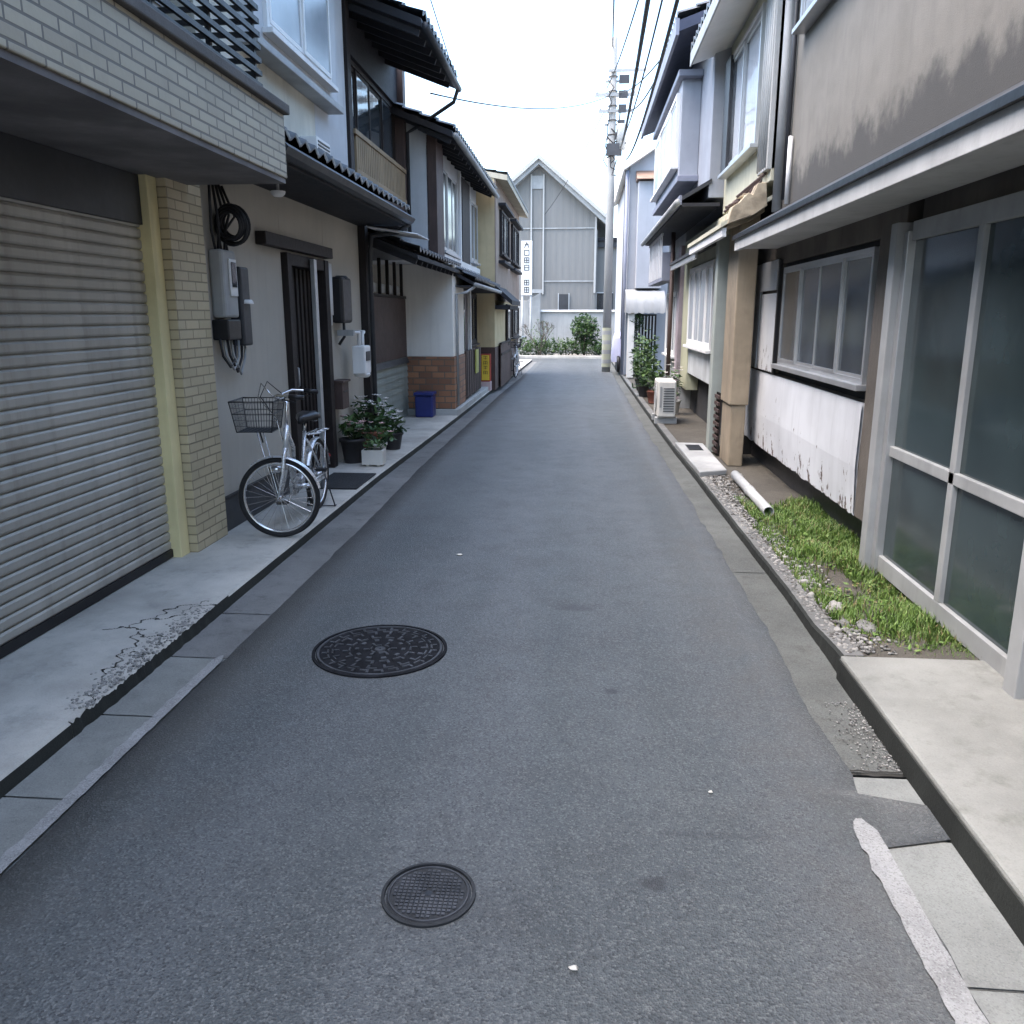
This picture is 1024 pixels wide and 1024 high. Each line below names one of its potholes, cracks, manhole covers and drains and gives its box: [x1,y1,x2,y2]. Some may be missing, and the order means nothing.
manhole cover [381,862,476,928]
crack [88,601,217,703]
manhole cover [312,624,447,678]
